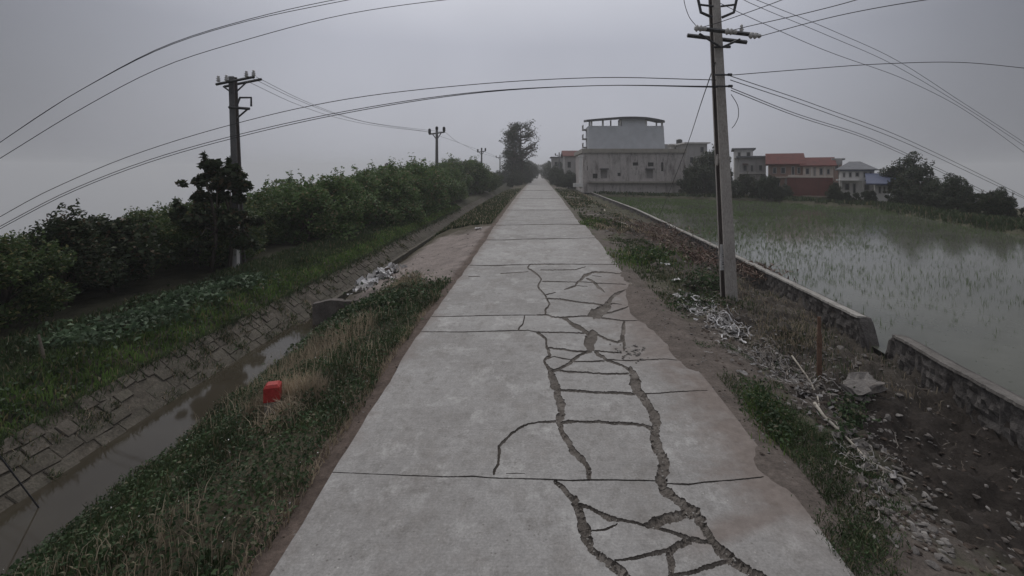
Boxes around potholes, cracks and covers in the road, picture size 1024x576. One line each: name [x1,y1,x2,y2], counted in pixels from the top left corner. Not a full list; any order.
crack [468,263,767,576]
